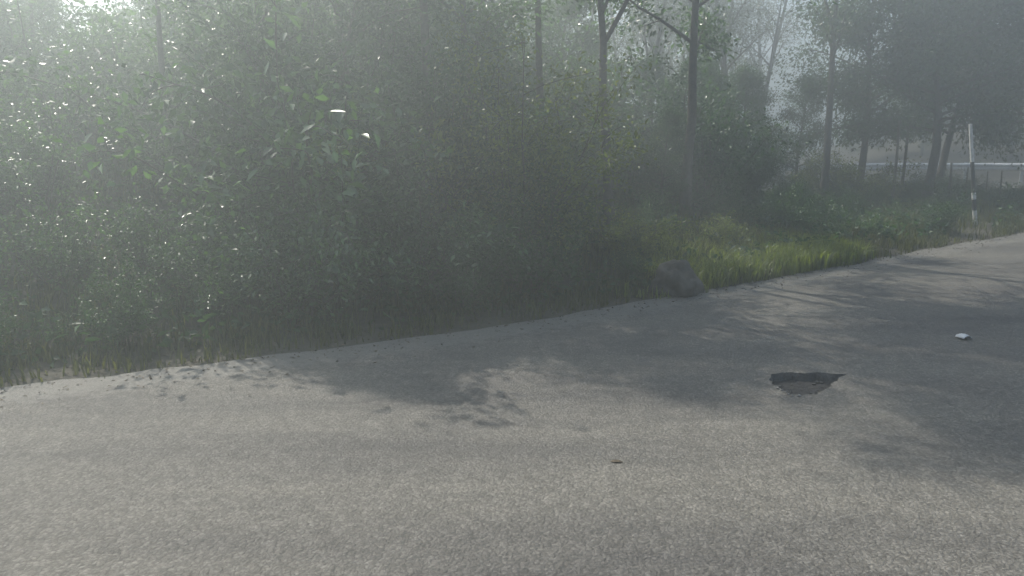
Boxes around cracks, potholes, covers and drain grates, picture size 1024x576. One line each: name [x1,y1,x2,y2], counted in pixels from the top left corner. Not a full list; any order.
pothole [769,372,846,396]
